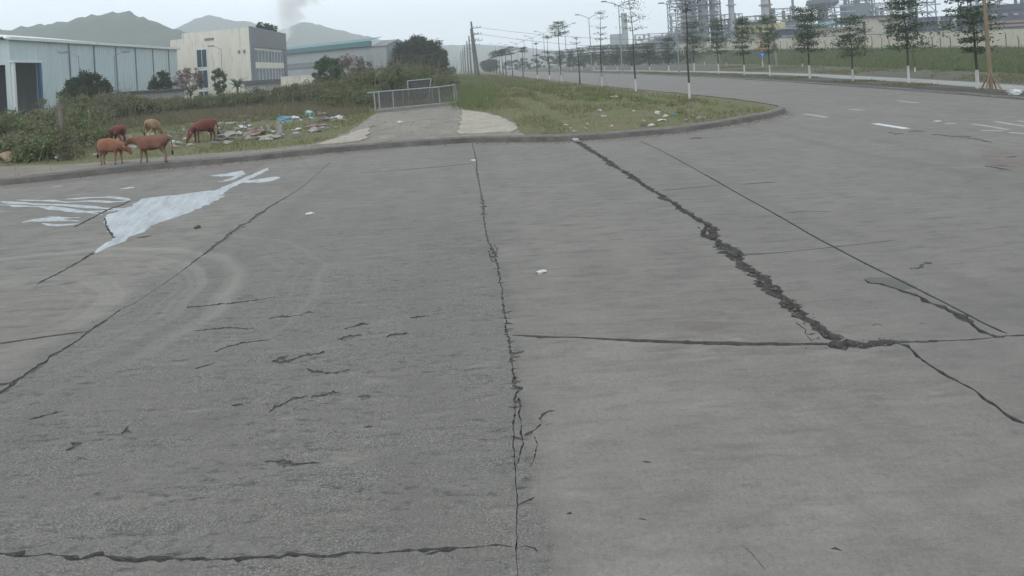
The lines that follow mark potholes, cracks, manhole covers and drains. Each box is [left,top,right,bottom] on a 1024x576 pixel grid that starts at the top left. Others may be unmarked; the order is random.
crack [0,544,512,563]
crack [573,142,1024,424]
